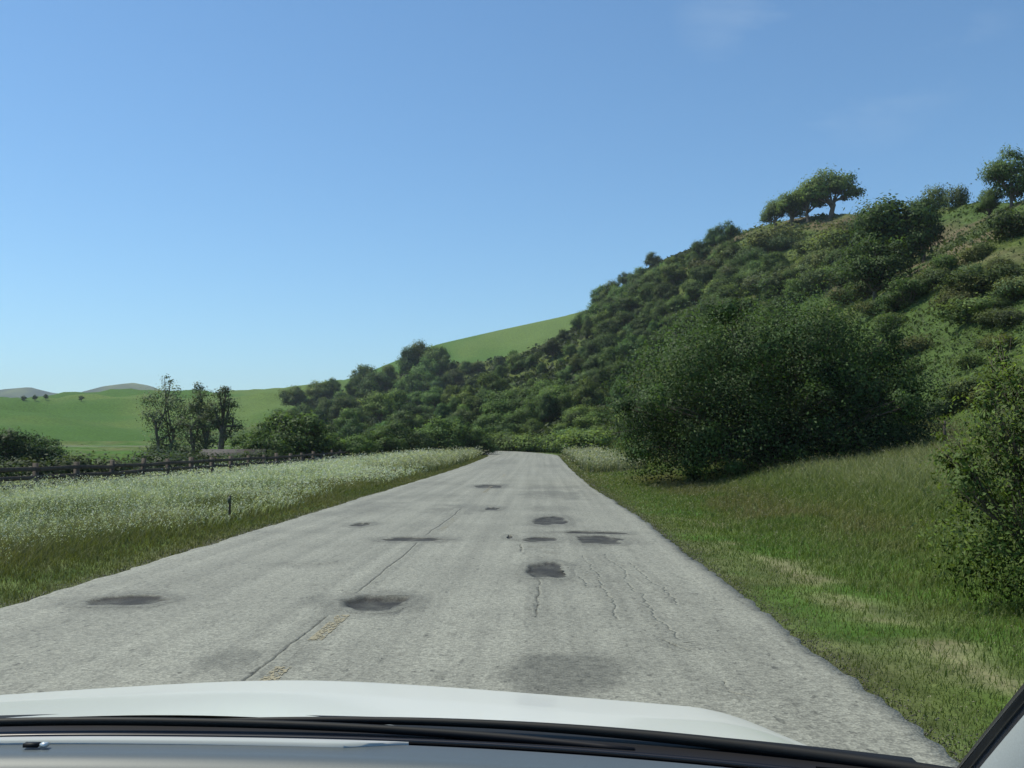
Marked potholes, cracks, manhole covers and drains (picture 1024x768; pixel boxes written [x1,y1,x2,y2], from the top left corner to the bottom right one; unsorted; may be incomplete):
crack [513,544,704,653]
crack [294,508,469,593]
